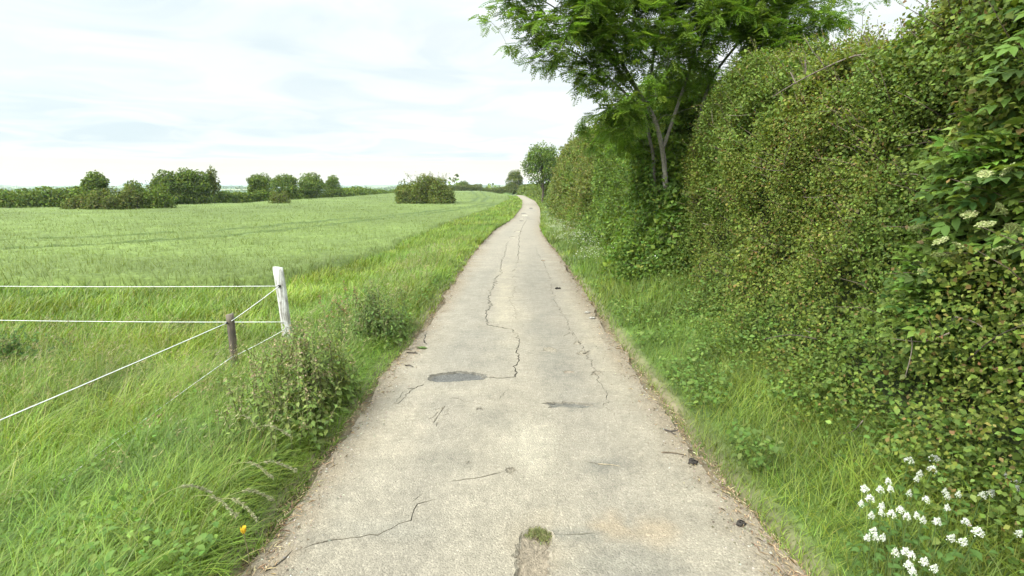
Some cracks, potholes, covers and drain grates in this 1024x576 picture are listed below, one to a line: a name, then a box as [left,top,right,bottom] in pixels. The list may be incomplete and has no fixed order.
crack [453,239,520,405]
crack [535,244,650,456]
crack [263,495,435,573]
crack [449,471,503,482]
pothole [511,525,556,576]
